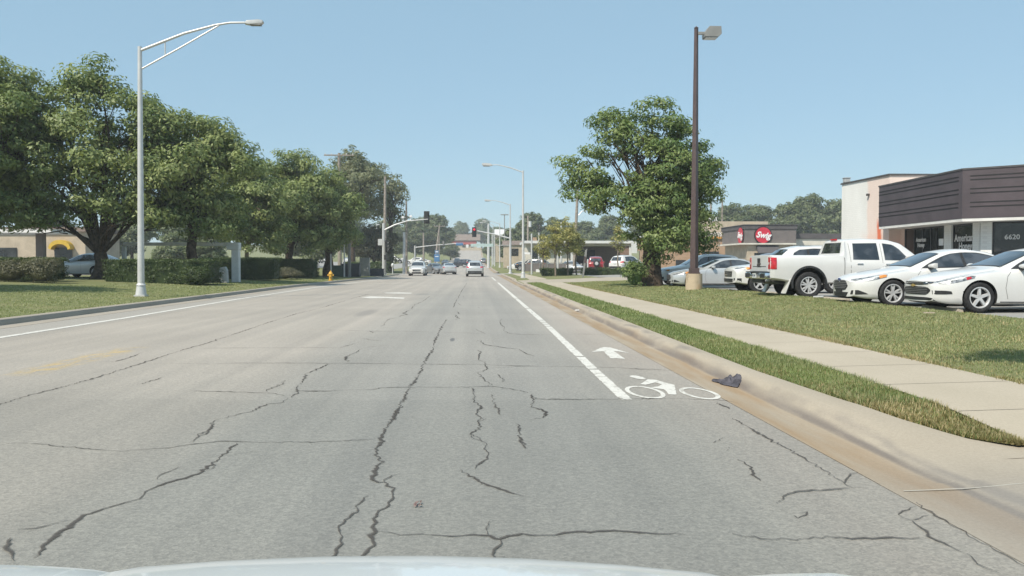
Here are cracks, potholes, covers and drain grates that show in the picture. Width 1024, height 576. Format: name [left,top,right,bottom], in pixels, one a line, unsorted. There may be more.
crack [3,283,1001,574]
